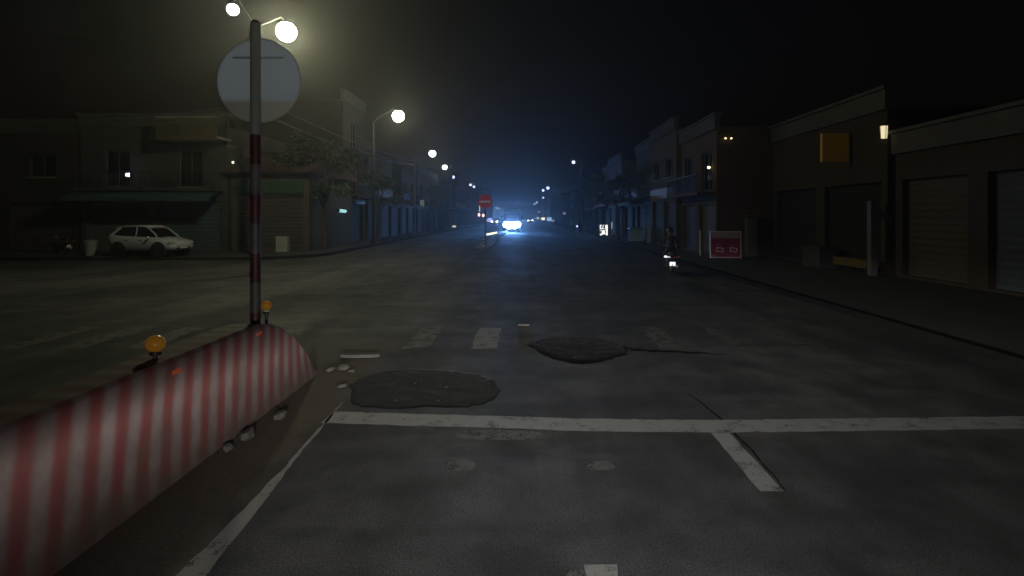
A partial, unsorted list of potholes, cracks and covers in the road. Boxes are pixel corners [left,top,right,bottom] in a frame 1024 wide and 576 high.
pothole [527,336,629,365]
crack [623,347,727,355]
pothole [348,369,501,409]
crack [688,393,785,490]
